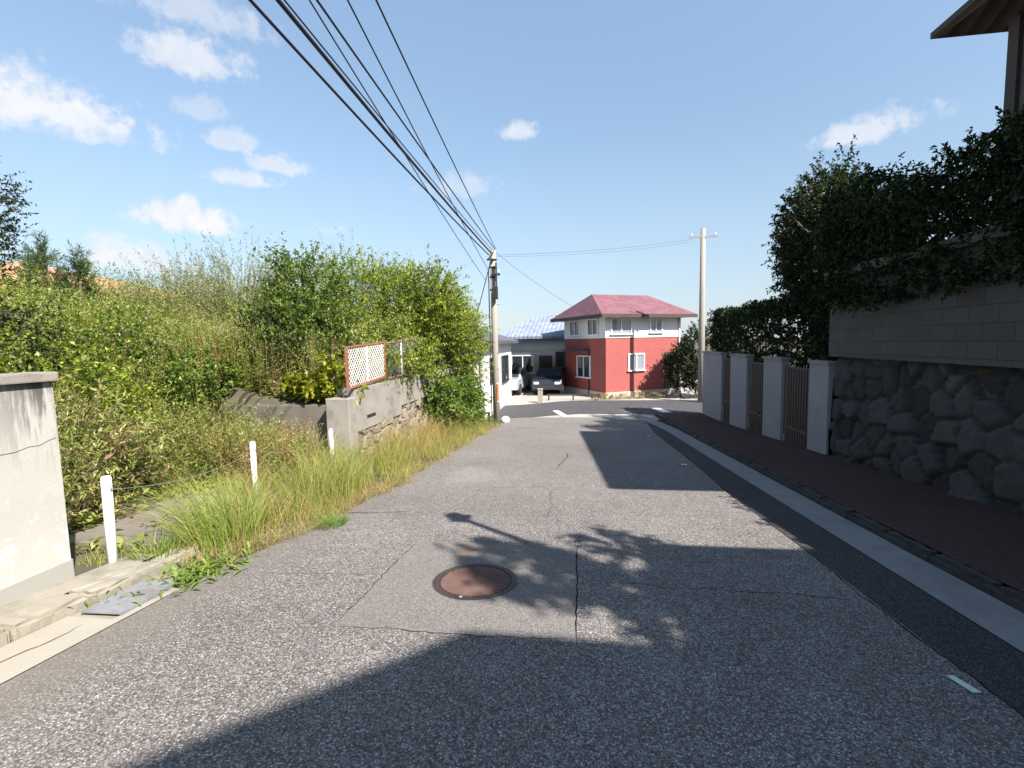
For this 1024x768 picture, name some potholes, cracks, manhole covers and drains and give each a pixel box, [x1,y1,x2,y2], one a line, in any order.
manhole cover [432,564,518,600]
crack [269,436,1024,717]
